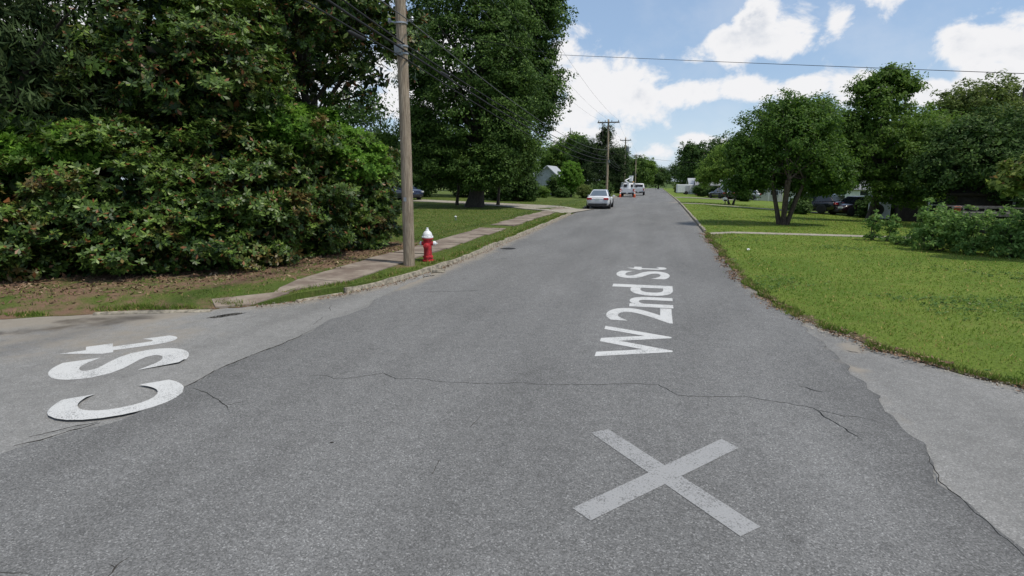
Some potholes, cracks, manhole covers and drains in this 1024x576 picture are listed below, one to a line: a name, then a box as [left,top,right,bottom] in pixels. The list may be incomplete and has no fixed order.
crack [929,456,1024,556]
crack [278,373,874,438]
